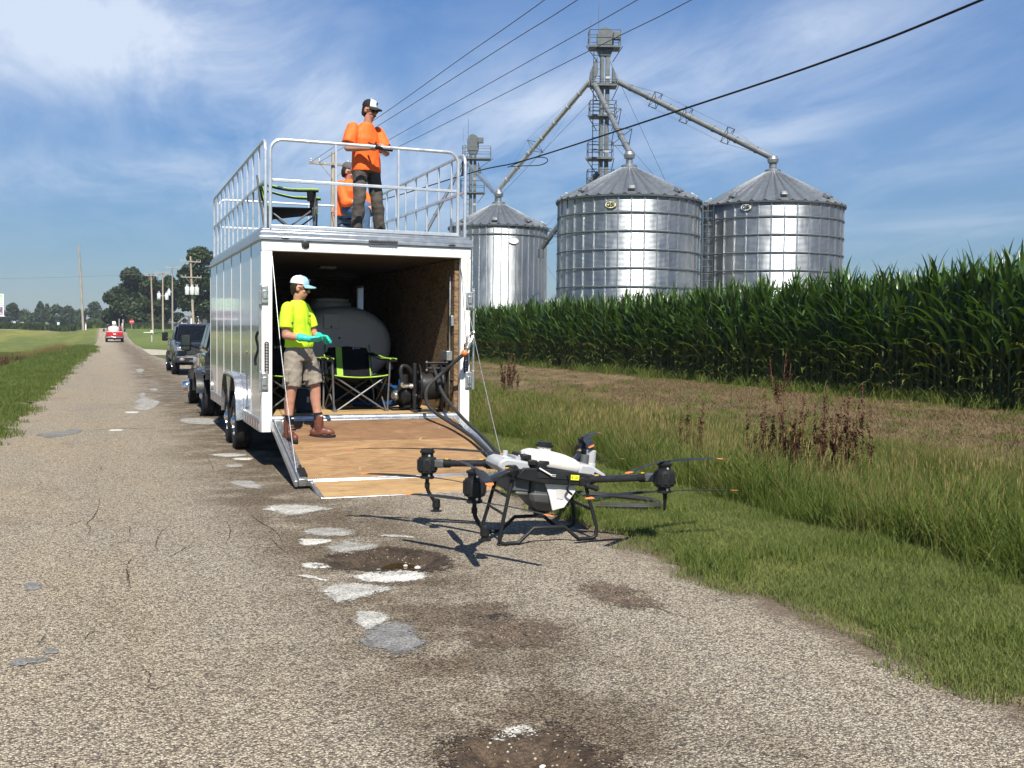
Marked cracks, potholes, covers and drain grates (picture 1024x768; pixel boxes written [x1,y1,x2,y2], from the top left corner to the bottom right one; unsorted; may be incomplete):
pothole [425,719,646,768]
pothole [312,545,464,574]
